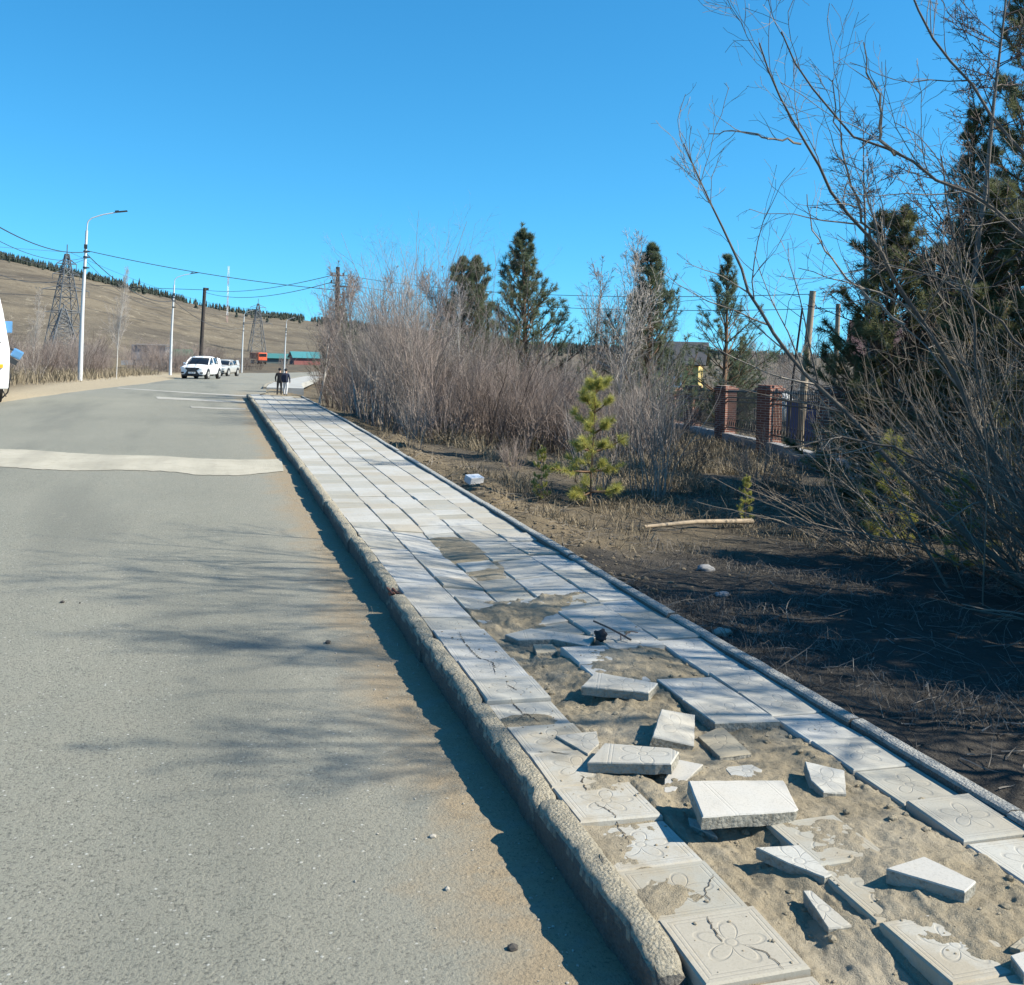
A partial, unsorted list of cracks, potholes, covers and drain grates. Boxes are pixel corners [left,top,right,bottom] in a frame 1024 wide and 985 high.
crack [460,634,540,723]
